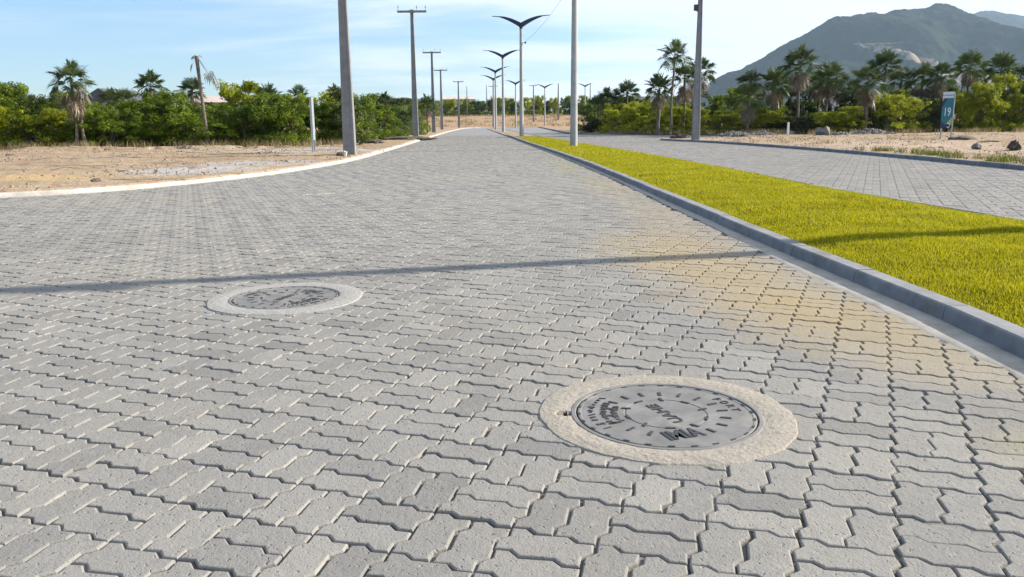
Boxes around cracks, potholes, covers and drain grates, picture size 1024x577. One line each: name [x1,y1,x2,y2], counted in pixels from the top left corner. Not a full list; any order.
manhole cover [538,375,798,469]
manhole cover [206,282,363,316]
